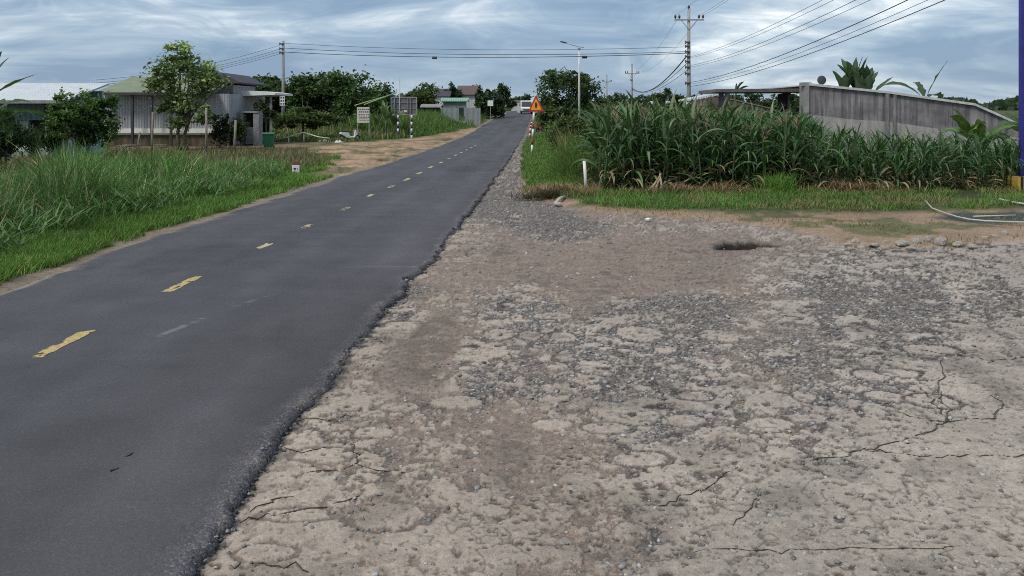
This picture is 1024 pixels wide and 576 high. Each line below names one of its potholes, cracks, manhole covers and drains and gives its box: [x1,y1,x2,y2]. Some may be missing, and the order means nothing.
crack [803,350,1024,465]
crack [284,444,406,473]
crack [230,561,309,573]
crack [694,546,954,554]
crack [240,495,360,523]
pothole [709,239,788,251]
crack [658,467,738,506]
